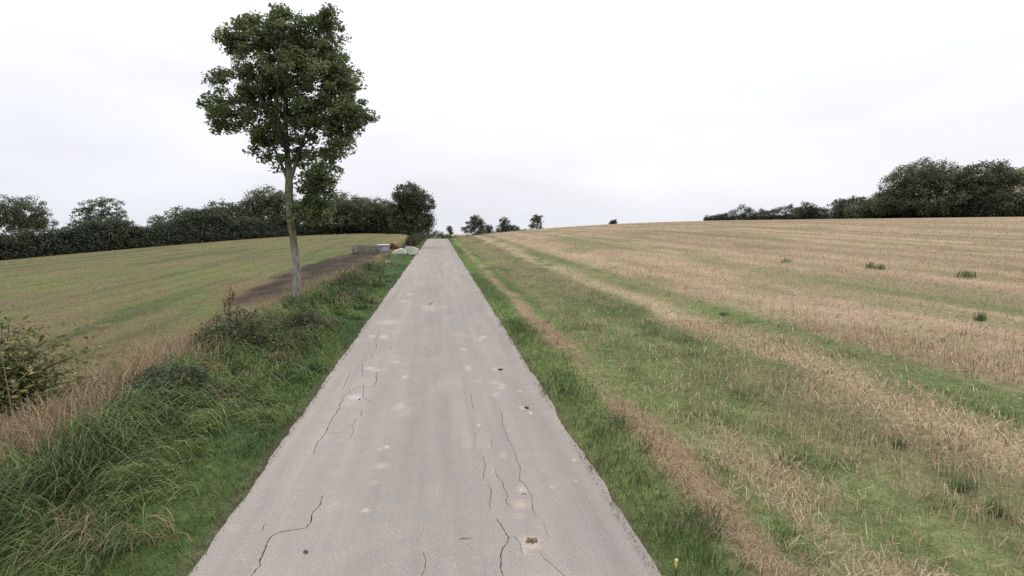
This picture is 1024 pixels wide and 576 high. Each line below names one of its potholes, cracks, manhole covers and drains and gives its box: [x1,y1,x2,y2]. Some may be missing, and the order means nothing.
crack [474,410,548,576]
crack [251,495,323,576]
crack [314,330,391,452]
